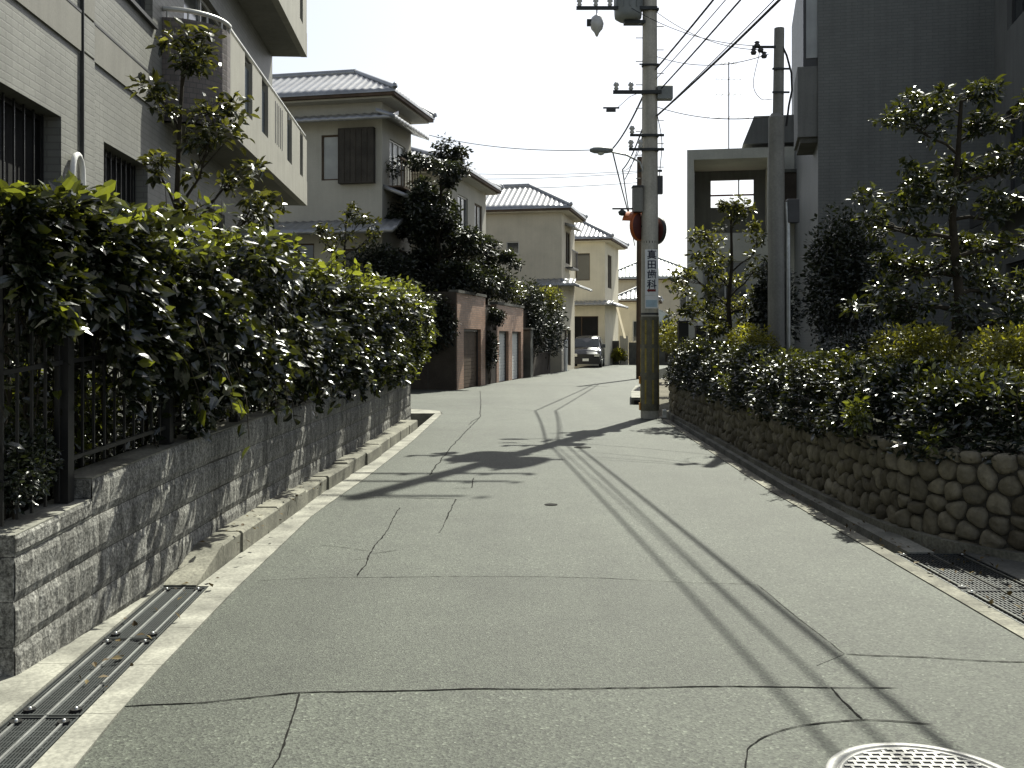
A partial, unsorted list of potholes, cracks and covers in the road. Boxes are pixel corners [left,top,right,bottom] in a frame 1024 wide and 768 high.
drain grate [14,638,156,718]
manhole cover [825,742,1005,768]
crack [744,688,930,768]
crack [429,393,481,475]
crack [272,693,300,768]
crack [325,478,474,576]
drain grate [0,715,79,768]
drain grate [104,587,207,639]
